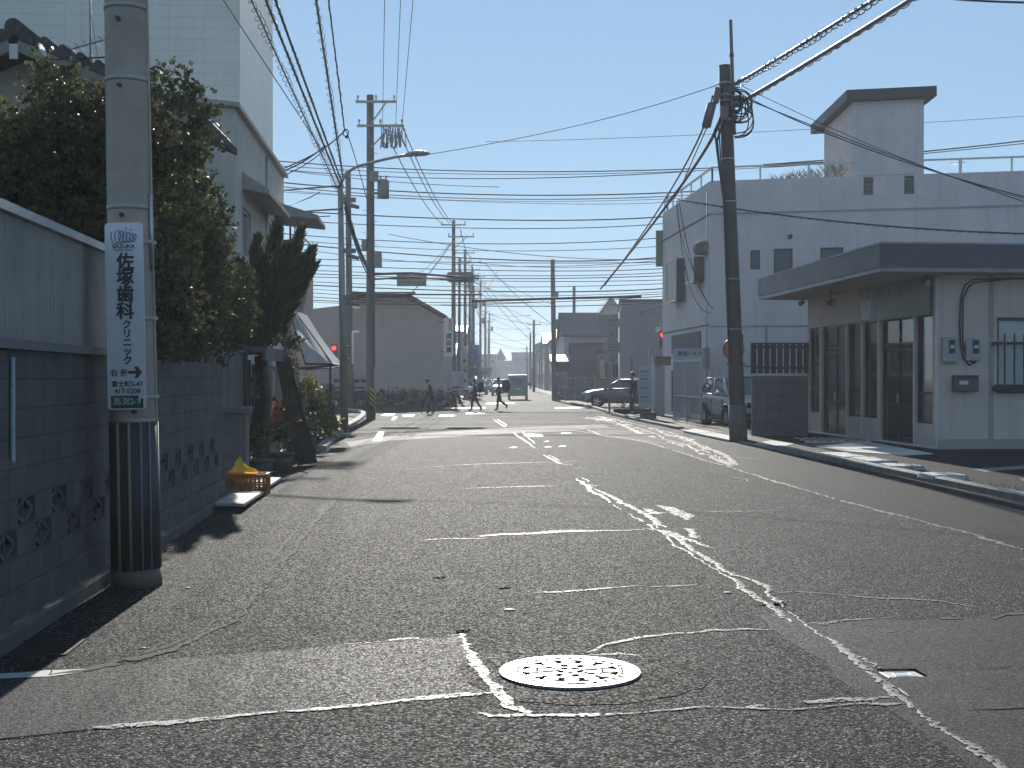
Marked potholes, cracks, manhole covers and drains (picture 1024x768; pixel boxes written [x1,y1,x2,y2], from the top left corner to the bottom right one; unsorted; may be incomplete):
crack [575,416,769,480]
manhole cover [499,655,641,690]
manhole cover [874,668,930,677]
crack [0,478,1024,768]
